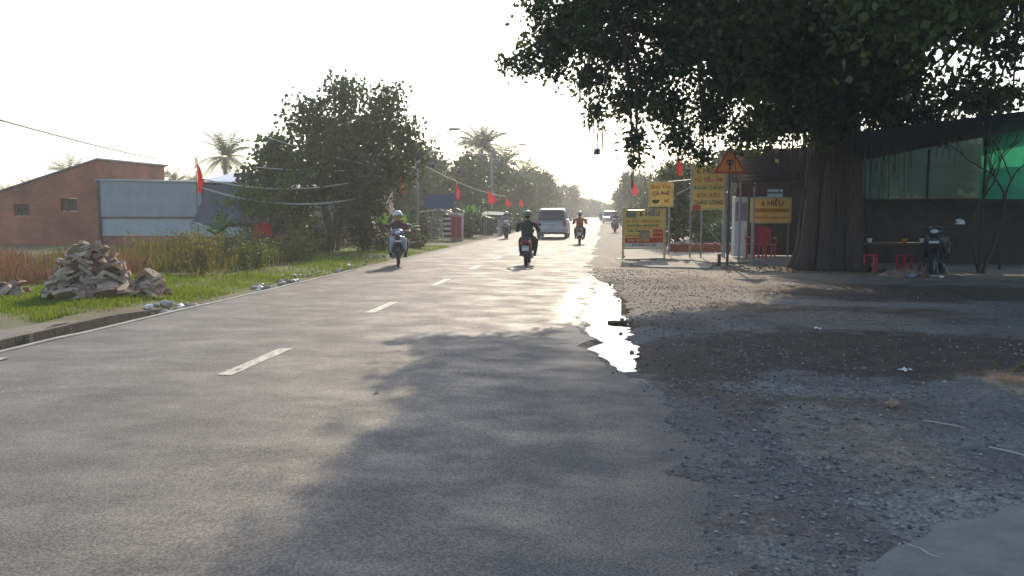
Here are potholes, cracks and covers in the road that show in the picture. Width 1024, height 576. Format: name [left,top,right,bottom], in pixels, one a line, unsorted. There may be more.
pothole [597,279,662,376]
